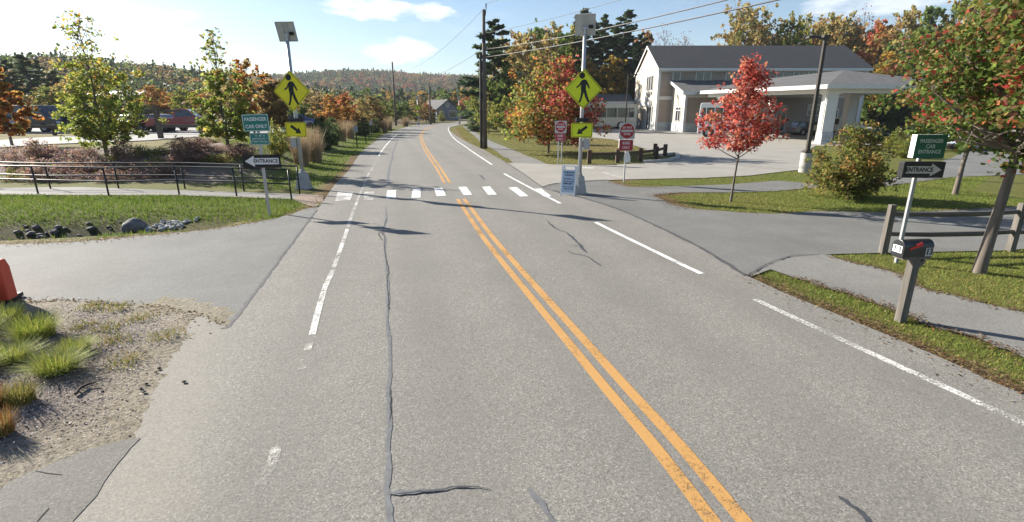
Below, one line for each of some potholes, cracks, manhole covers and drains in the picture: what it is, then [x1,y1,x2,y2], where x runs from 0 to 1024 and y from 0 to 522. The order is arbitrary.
crack [527,488,555,522]
crack [538,214,600,265]
